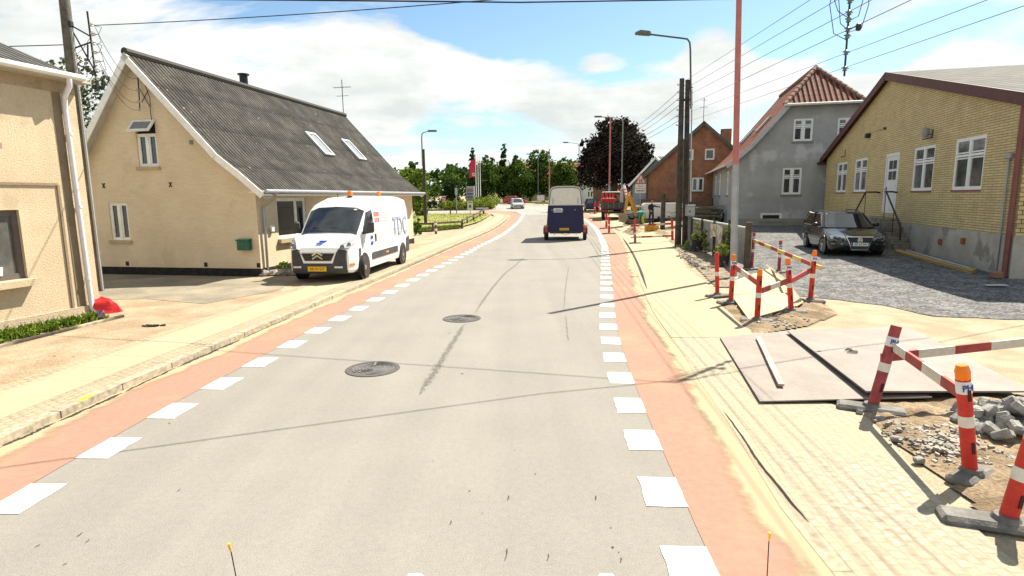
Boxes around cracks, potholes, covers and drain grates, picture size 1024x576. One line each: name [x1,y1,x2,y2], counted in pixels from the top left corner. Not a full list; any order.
manhole cover [345,361,400,377]
manhole cover [443,314,481,323]
